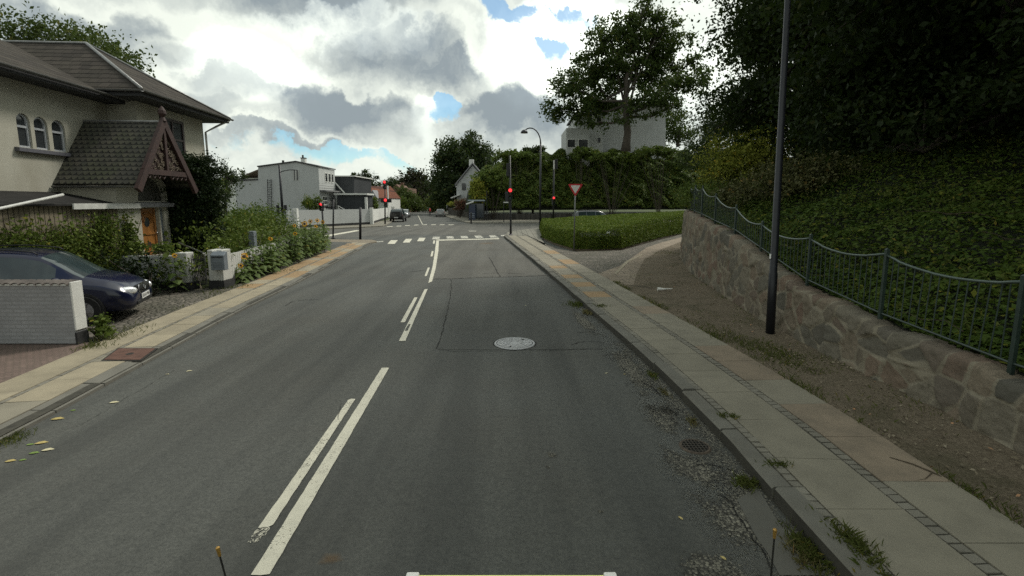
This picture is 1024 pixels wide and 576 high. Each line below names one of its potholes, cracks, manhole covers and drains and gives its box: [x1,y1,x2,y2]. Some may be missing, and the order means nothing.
manhole cover [101,348,158,362]
drain grate [679,439,712,455]
manhole cover [493,337,537,350]
